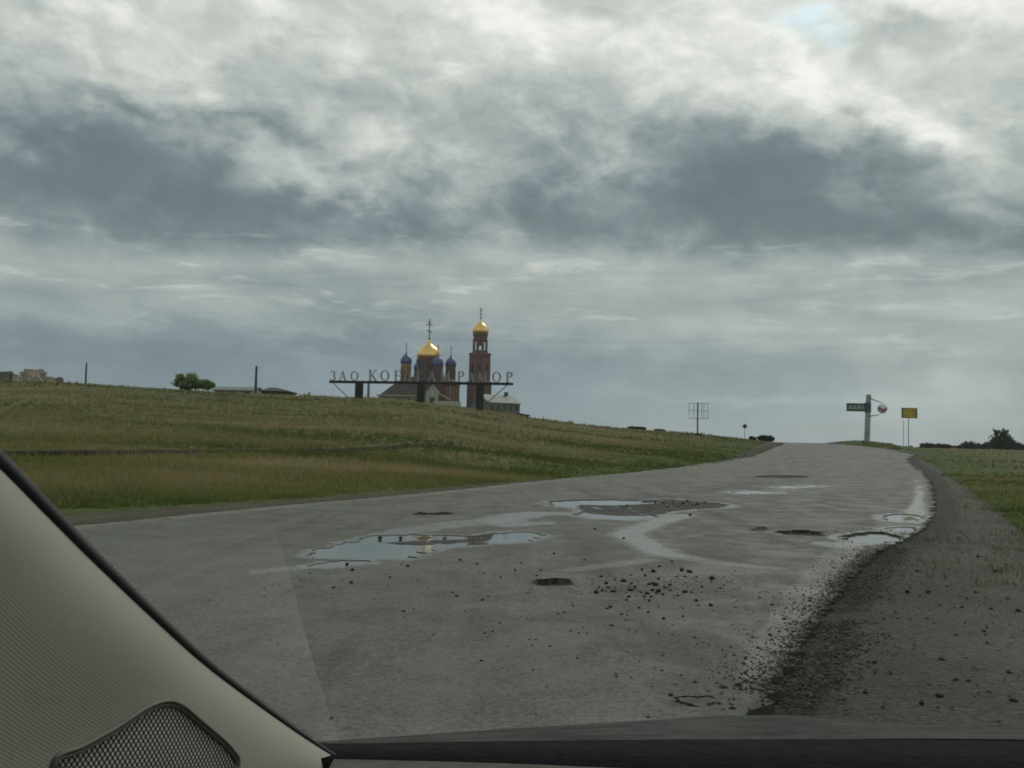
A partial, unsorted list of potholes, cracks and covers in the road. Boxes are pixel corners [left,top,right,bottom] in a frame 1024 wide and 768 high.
pothole [531,578,573,586]
pothole [838,531,905,543]
crack [674,695,722,707]
pothole [550,499,727,519]
pothole [305,531,547,558]
